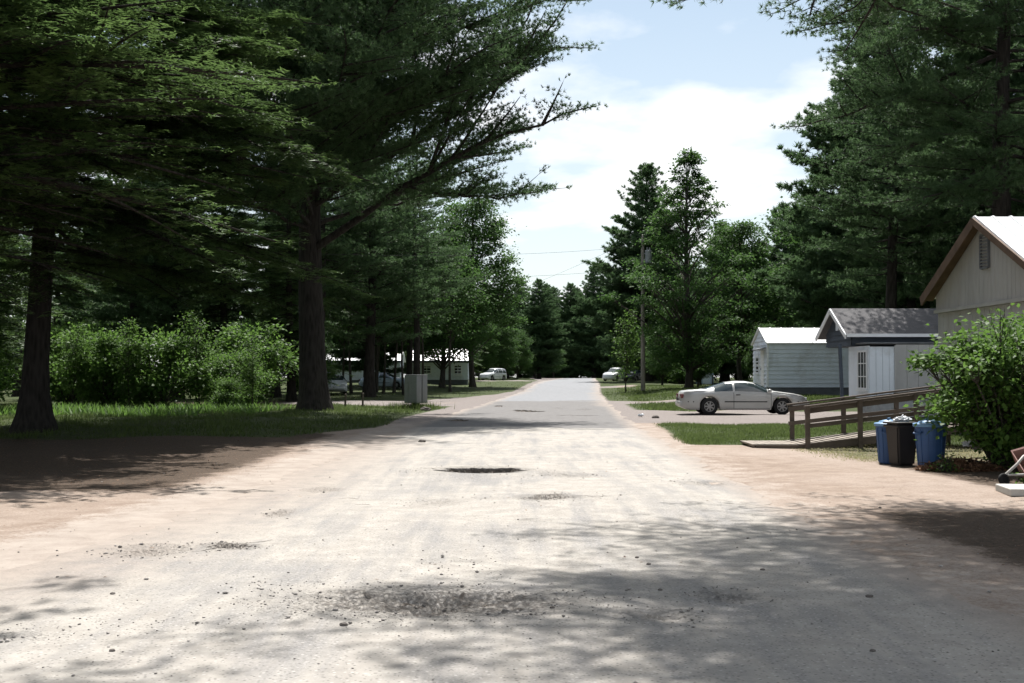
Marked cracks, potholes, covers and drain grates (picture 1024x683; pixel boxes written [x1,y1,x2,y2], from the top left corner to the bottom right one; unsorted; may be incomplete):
pothole [205,541,254,549]
pothole [311,590,560,617]
pothole [116,546,188,558]
